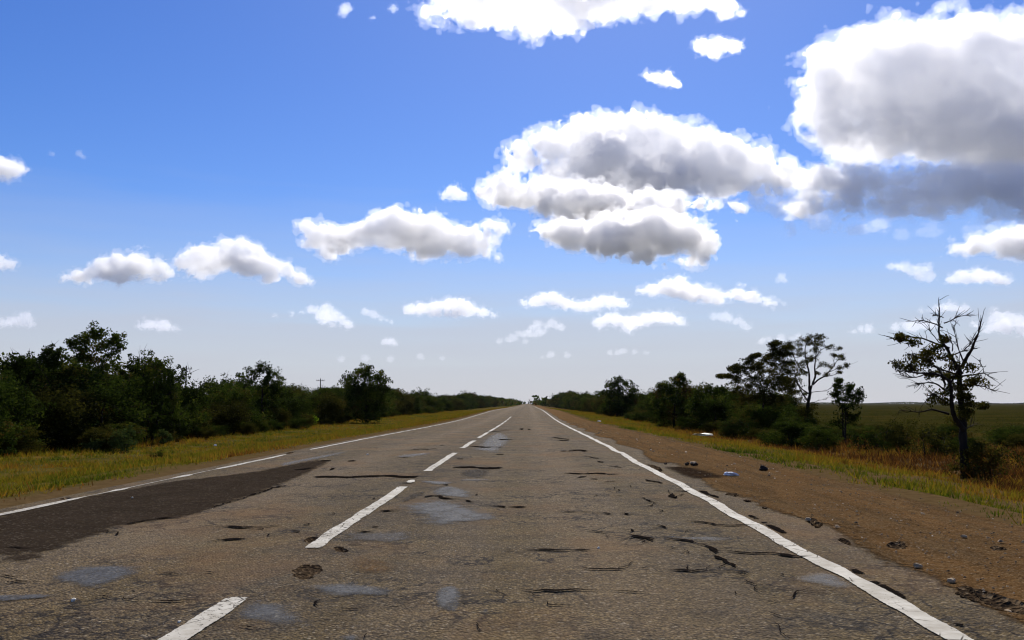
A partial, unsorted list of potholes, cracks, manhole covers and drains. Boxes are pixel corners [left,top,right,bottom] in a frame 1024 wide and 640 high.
crack [292,460,417,478]
crack [444,428,531,485]
crack [495,588,593,606]
crack [535,437,832,638]
pothole [291,564,323,580]
pothole [955,585,1024,614]
